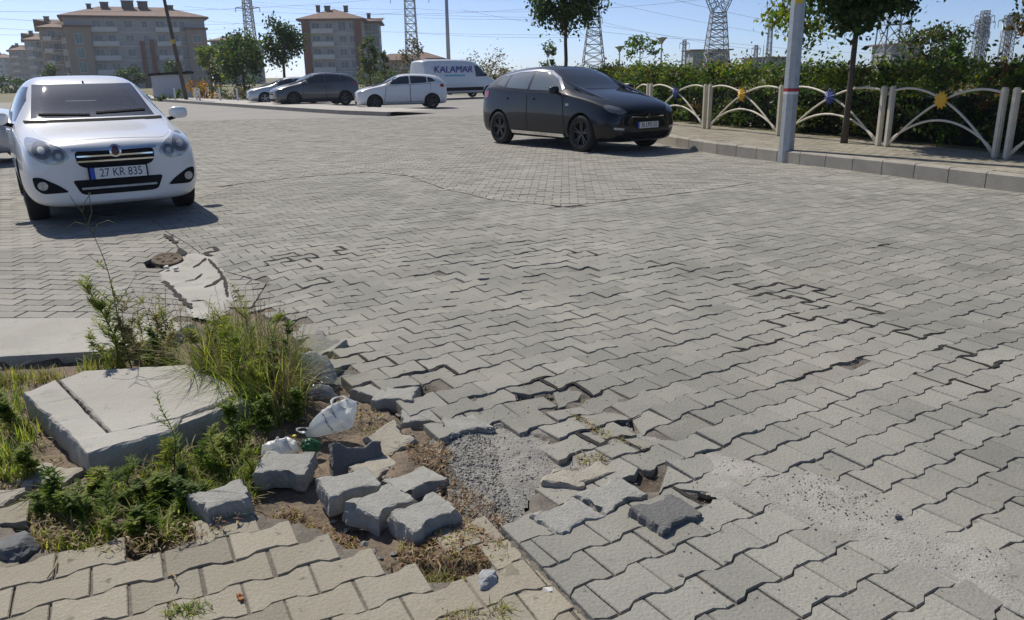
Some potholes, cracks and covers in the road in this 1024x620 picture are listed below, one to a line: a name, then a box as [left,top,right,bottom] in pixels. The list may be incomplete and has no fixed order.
manhole cover [151,252,183,267]
pothole [430,428,572,537]
pothole [626,473,663,492]
crack [732,282,1013,392]
crack [160,234,228,308]
